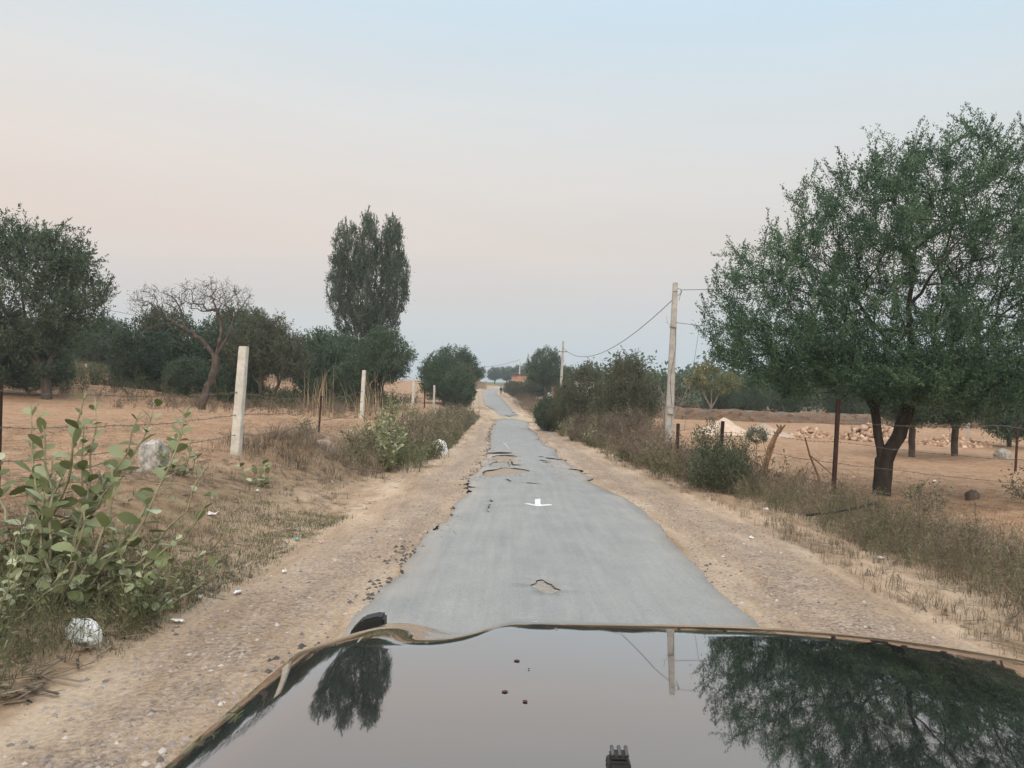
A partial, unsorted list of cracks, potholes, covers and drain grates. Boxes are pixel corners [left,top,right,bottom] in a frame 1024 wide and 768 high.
pothole [532,580,560,594]
pothole [482,468,526,476]
